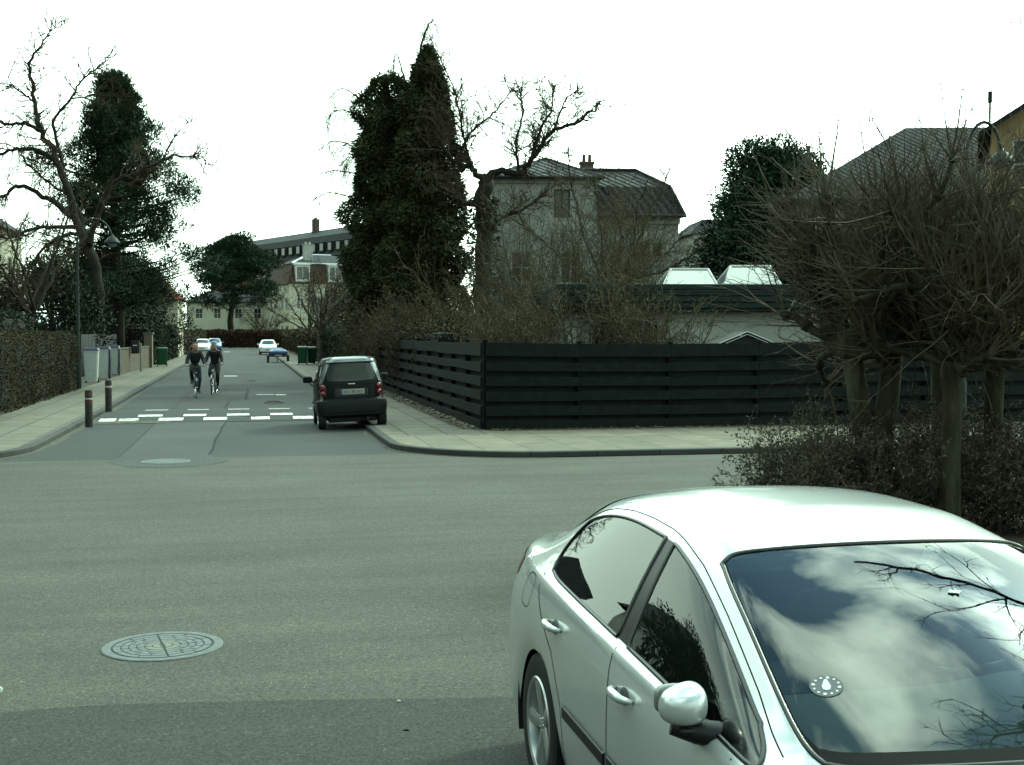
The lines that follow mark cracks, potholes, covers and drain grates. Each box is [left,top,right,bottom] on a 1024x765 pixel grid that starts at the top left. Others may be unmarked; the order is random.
crack [208,380,253,455]
manhole cover [100,631,223,662]
